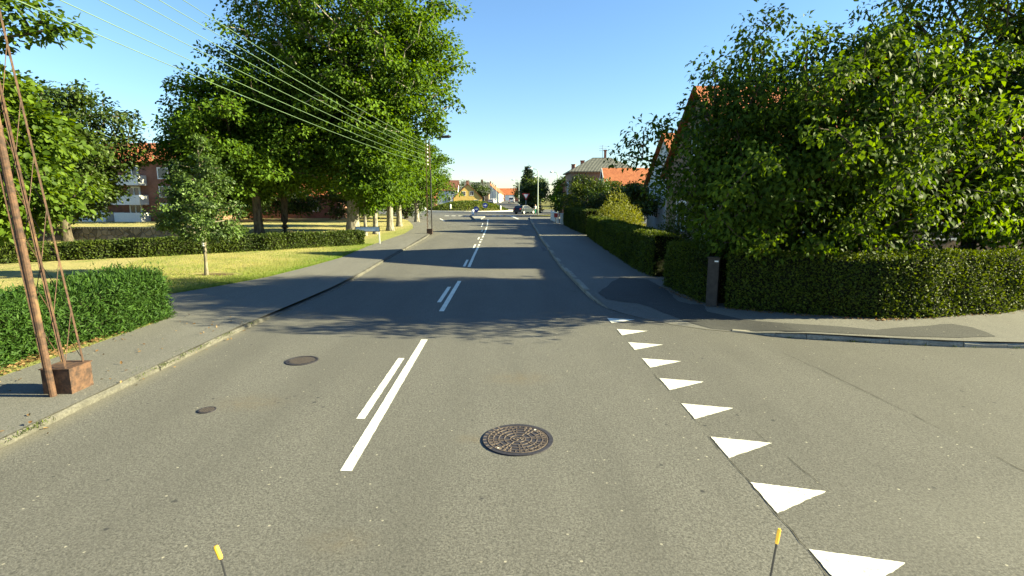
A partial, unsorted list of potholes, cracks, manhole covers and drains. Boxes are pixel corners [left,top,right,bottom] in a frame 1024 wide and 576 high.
manhole cover [483,424,553,456]
manhole cover [285,356,319,366]
manhole cover [197,406,217,414]
